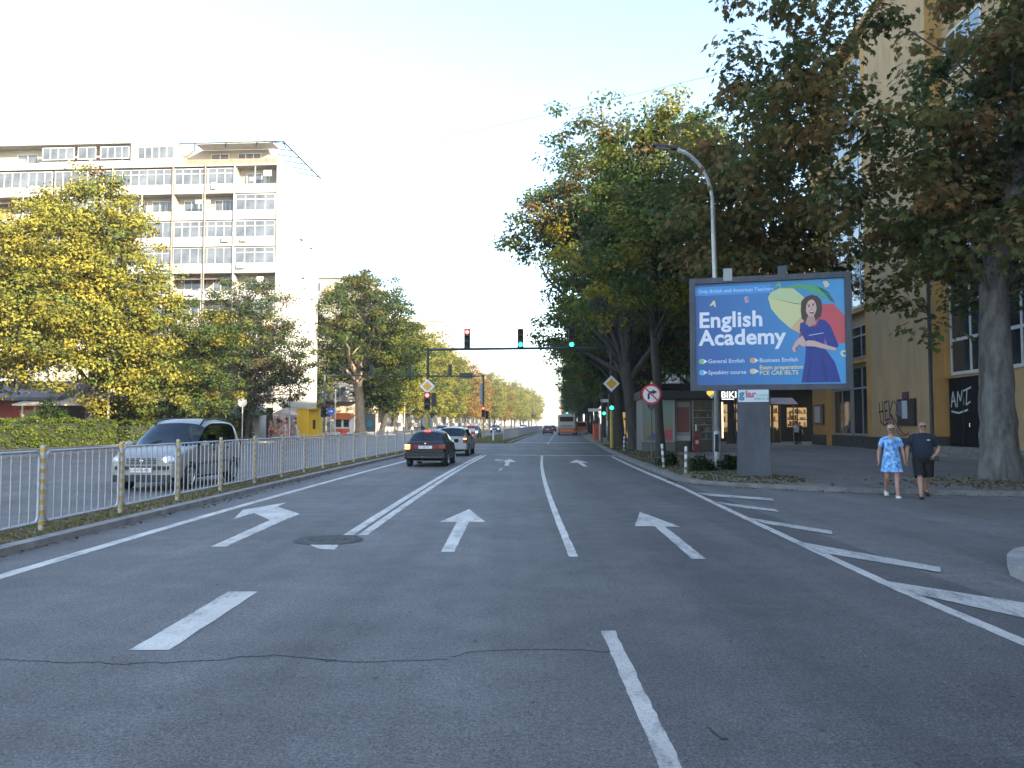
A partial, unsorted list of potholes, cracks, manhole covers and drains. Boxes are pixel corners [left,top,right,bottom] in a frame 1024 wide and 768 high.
manhole cover [293,535,363,545]
crack [3,649,615,666]
